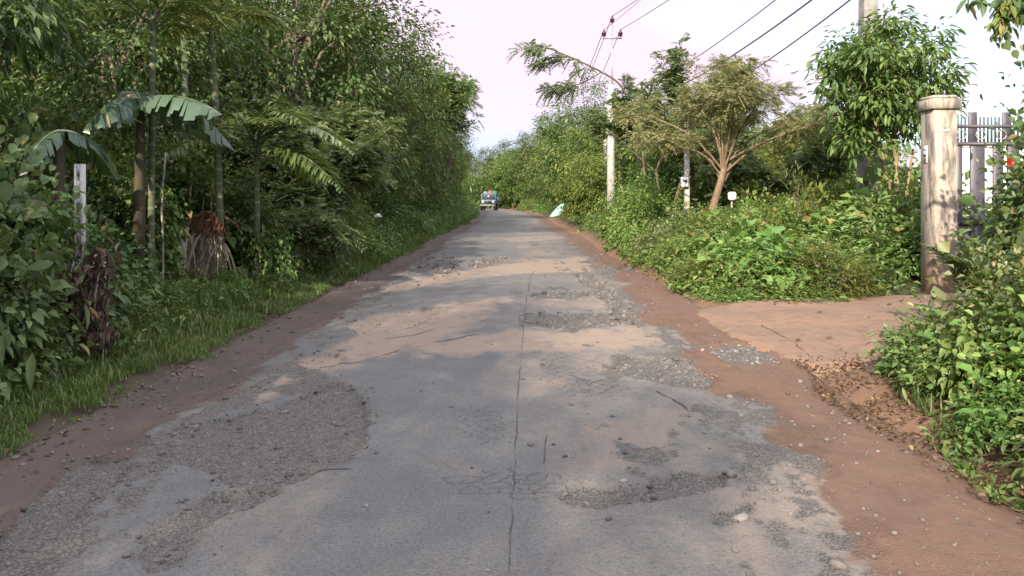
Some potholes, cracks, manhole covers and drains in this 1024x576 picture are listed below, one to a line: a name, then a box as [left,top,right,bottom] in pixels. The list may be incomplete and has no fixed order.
pothole [513,309,634,329]
crack [442,434,573,502]
pothole [467,256,506,268]
pothole [408,255,466,274]
pothole [701,342,780,366]
pothole [144,386,380,498]
pothole [601,355,718,389]
pothole [559,473,726,509]
